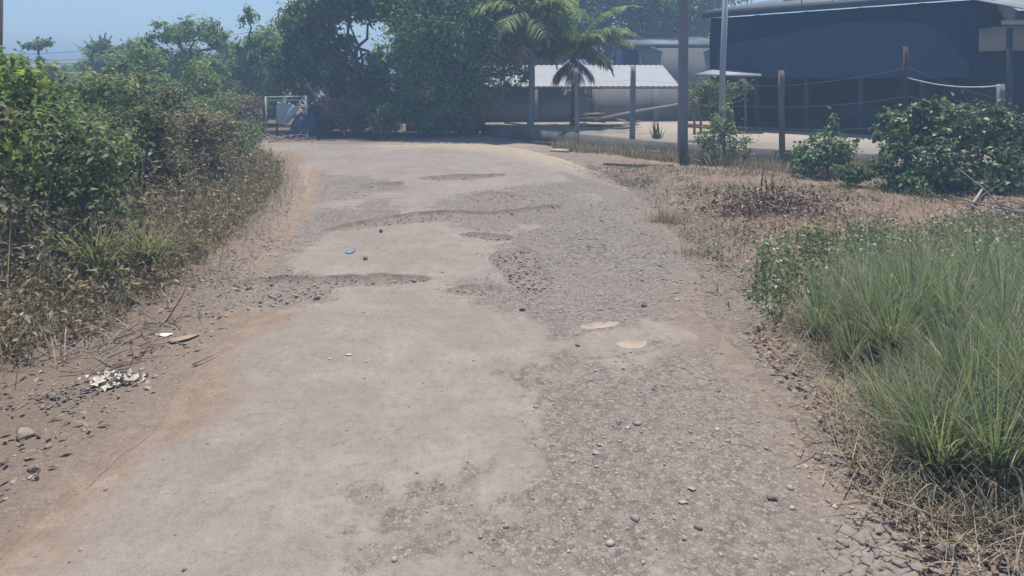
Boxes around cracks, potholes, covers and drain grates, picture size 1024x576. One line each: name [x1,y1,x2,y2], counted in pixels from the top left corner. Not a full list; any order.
pothole [235,273,433,308]
pothole [460,232,514,241]
pothole [488,246,553,298]
pothole [446,284,503,296]
pothole [321,204,562,231]
pothole [419,173,506,181]
pothole [358,182,405,191]
